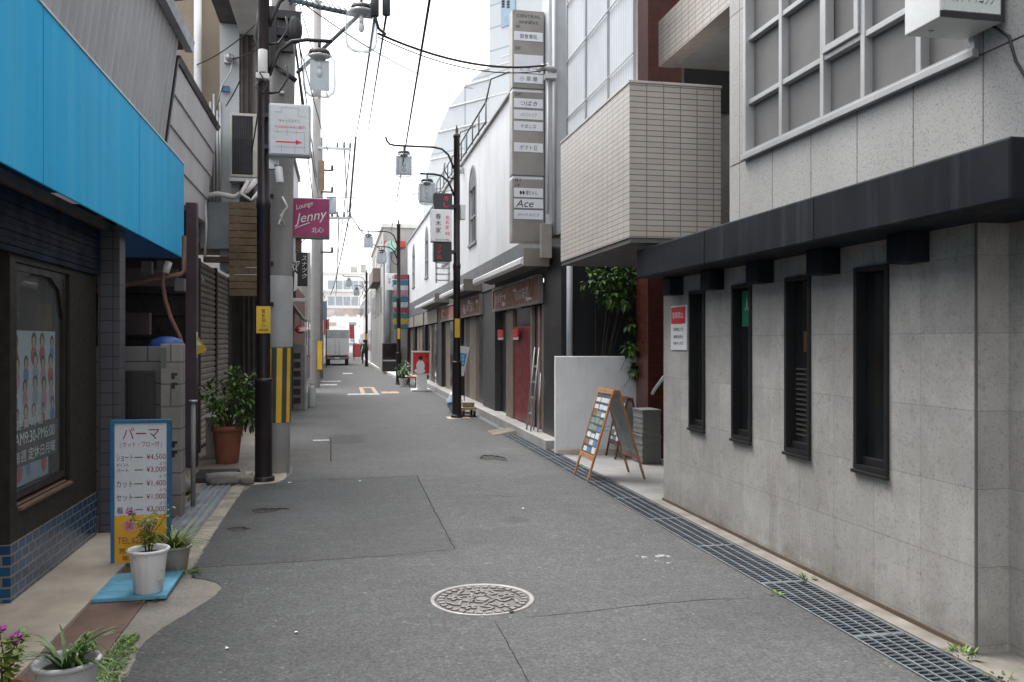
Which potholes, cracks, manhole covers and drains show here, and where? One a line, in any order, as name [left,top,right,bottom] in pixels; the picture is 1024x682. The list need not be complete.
drain grate [696,544,803,584]
drain grate [542,457,585,469]
drain grate [613,497,681,520]
drain grate [526,448,564,457]
drain grate [760,580,904,638]
drain grate [512,440,543,448]
manhole cover [430,583,535,616]
drain grate [649,517,733,547]
drain grate [561,468,611,482]
drain grate [585,481,642,499]
drain grate [853,632,1000,682]
